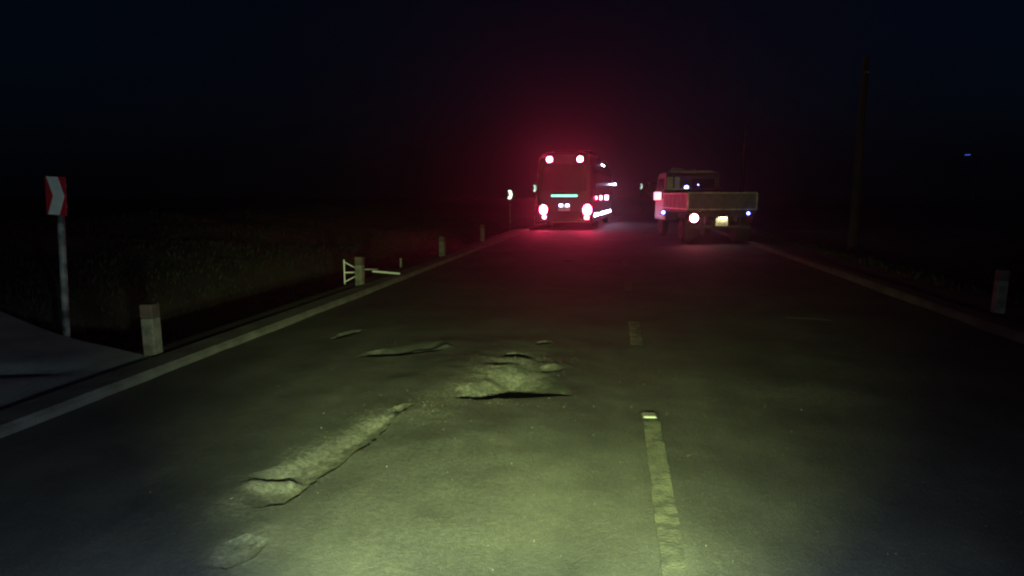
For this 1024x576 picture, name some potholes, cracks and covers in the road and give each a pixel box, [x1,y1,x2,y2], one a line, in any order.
pothole [234,401,417,509]
pothole [200,533,270,570]
pothole [357,340,449,357]
pothole [539,363,565,374]
pothole [329,329,364,340]
pothole [452,365,577,400]
